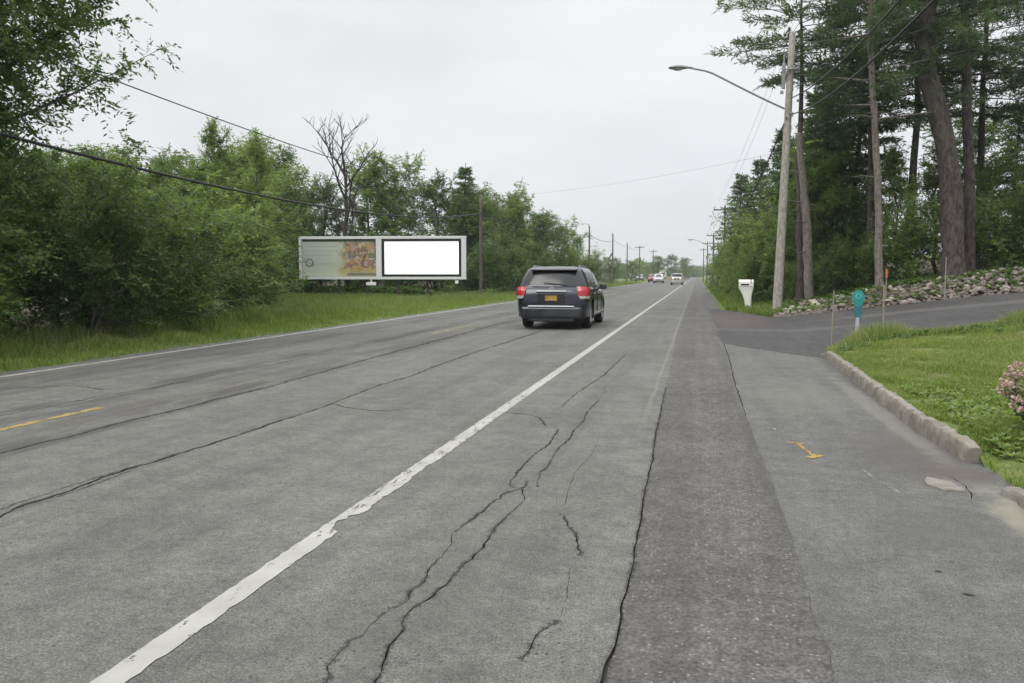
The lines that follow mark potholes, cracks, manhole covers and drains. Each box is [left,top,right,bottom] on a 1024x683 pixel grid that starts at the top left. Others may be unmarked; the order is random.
crack [0,328,637,683]
